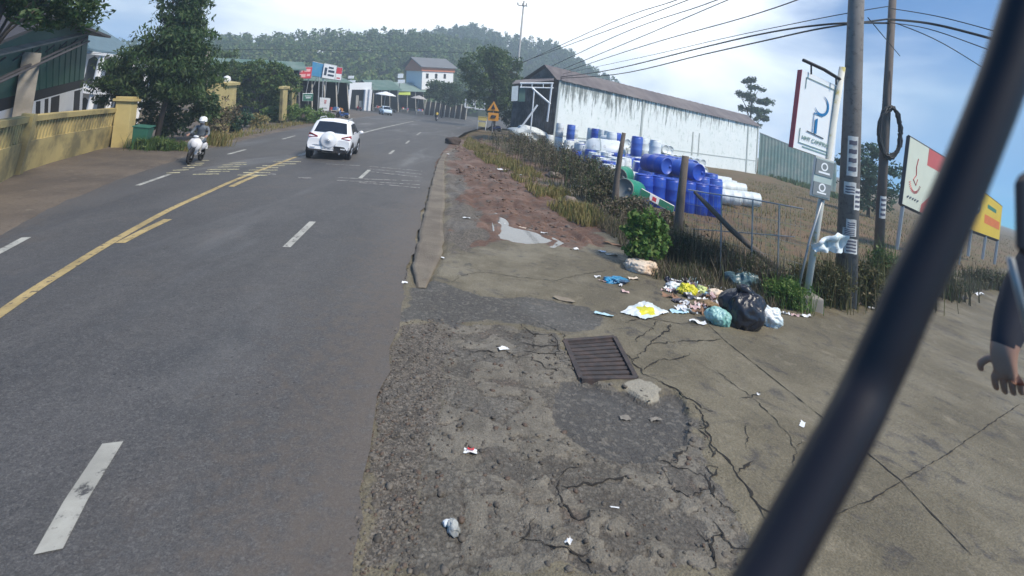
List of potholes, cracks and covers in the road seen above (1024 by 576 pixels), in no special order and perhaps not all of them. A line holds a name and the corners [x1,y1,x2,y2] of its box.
crack [401,318,802,576]
drain grate [563,335,639,385]
